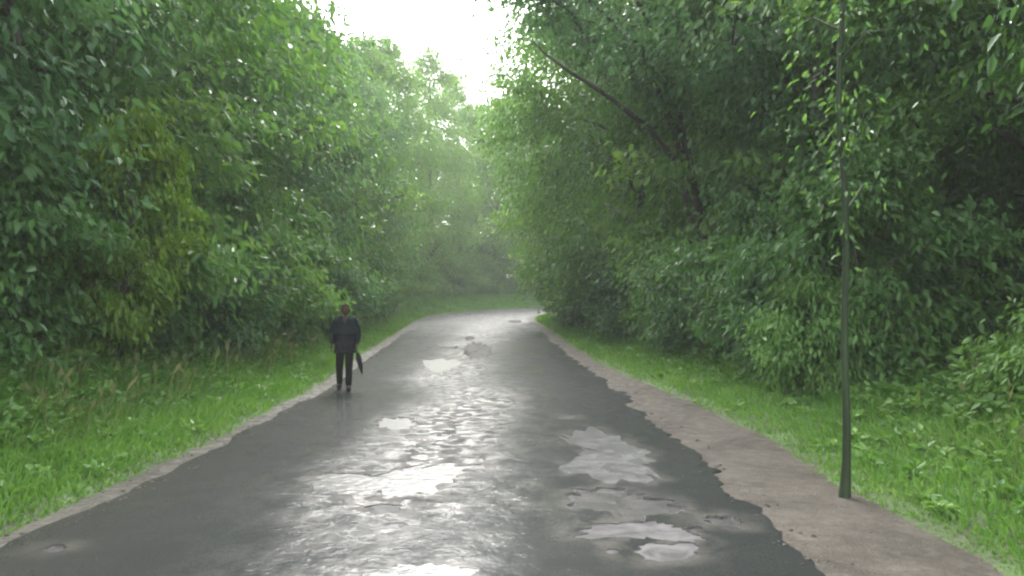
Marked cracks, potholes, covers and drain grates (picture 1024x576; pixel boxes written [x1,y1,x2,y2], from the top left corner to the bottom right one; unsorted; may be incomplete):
pothole [44,544,67,553]
pothole [462,341,494,360]
